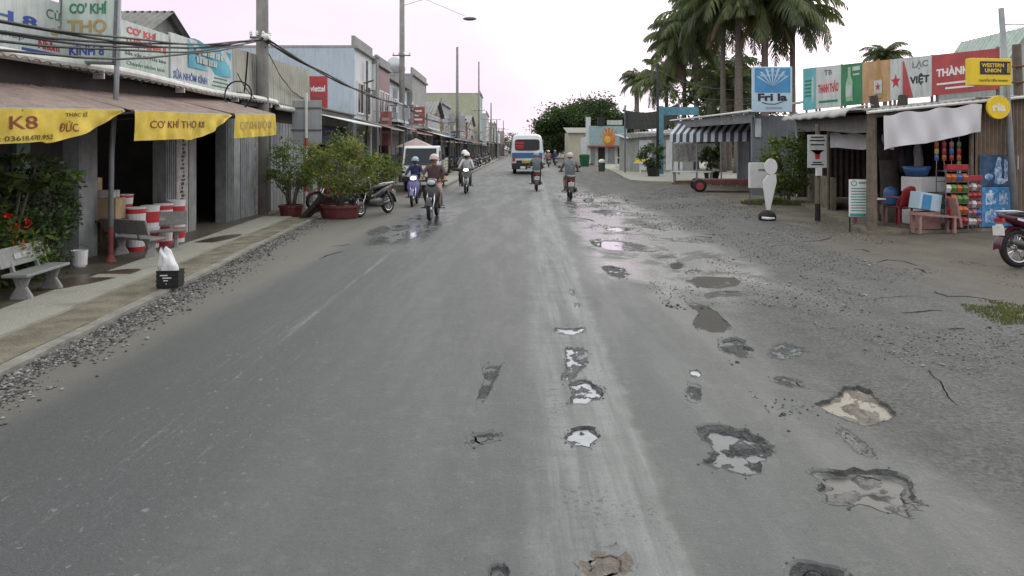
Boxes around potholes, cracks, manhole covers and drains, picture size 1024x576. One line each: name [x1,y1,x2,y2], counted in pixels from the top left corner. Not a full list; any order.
pothole [573,542,639,576]
pothole [718,336,755,358]
pothole [806,466,929,519]
pothole [688,302,733,335]
pothole [561,346,591,381]
pothole [566,376,607,404]
pothole [767,375,808,388]
pothole [684,381,703,403]
pothole [768,342,806,360]
pothole [681,276,742,289]
pothole [784,557,853,576]
crack [873,291,1005,330]
